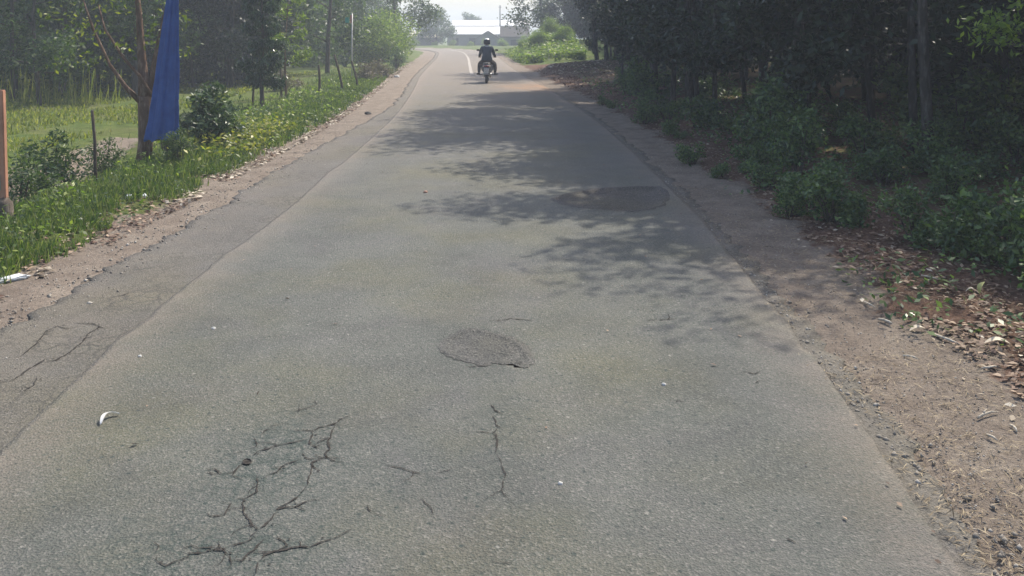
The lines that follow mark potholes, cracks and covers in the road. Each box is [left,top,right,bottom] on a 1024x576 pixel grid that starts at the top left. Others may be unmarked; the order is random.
crack [475,405,510,501]
crack [154,400,351,572]
crack [0,323,104,391]
